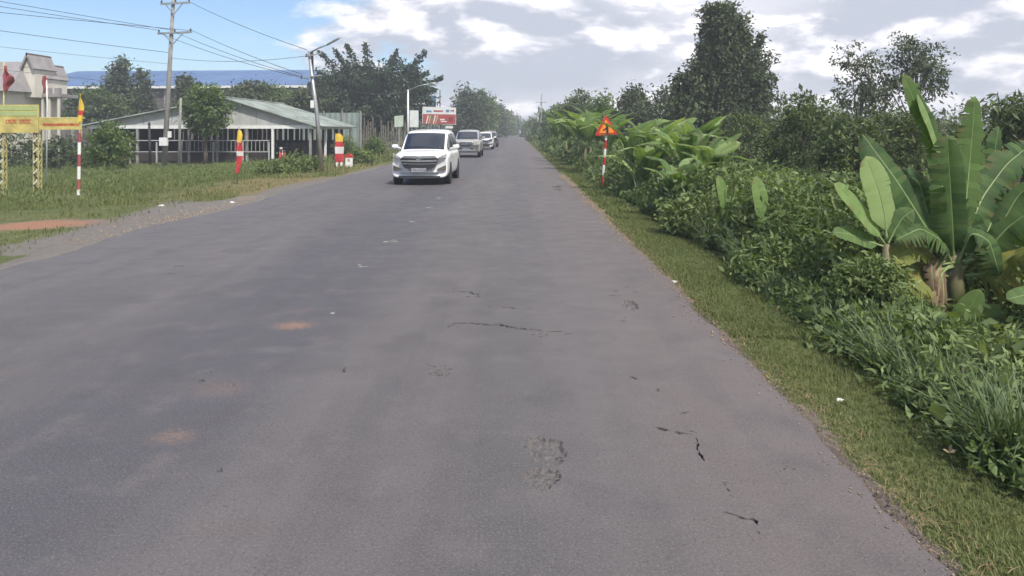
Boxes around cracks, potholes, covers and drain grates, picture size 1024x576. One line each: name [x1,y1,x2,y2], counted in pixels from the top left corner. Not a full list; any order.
crack [655,411,730,491]
crack [447,291,571,337]
pothole [519,436,567,491]
crack [723,512,760,534]
